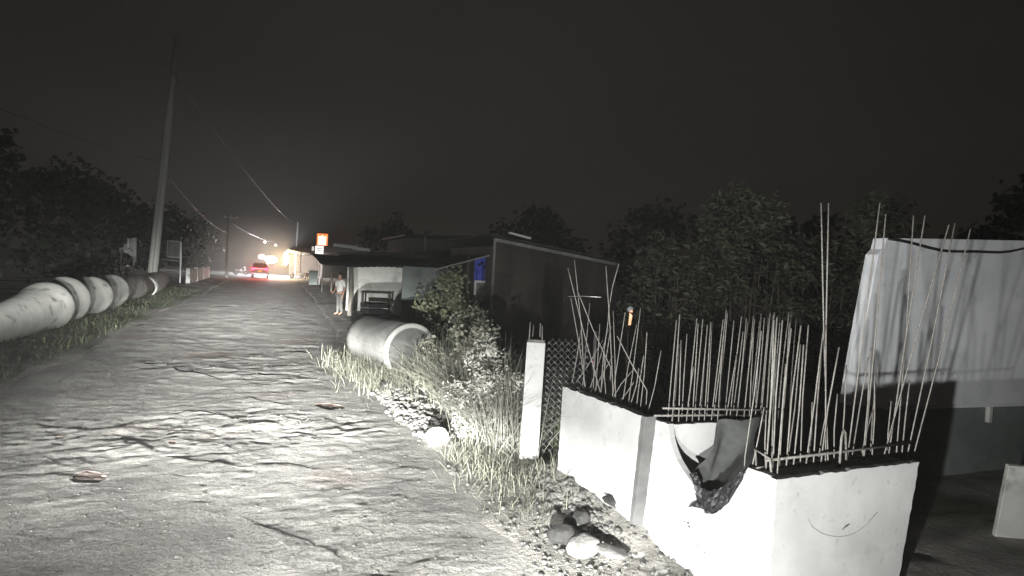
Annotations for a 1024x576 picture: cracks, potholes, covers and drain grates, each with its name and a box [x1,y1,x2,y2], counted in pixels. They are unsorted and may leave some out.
crack [238,514,344,559]
crack [89,330,317,486]
